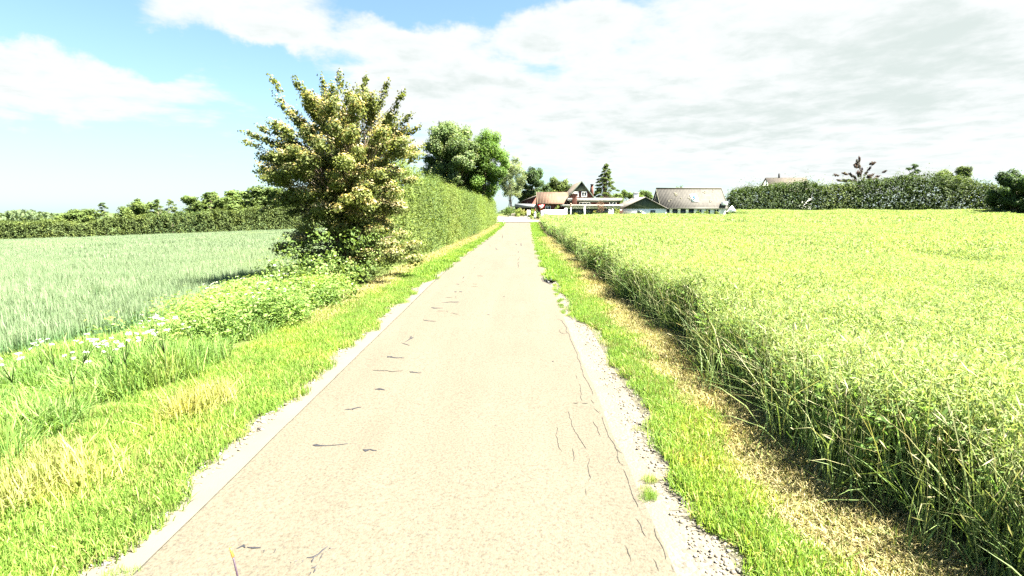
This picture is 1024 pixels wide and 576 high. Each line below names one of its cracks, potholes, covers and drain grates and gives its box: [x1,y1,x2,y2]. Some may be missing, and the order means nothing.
crack [556,320,674,570]
